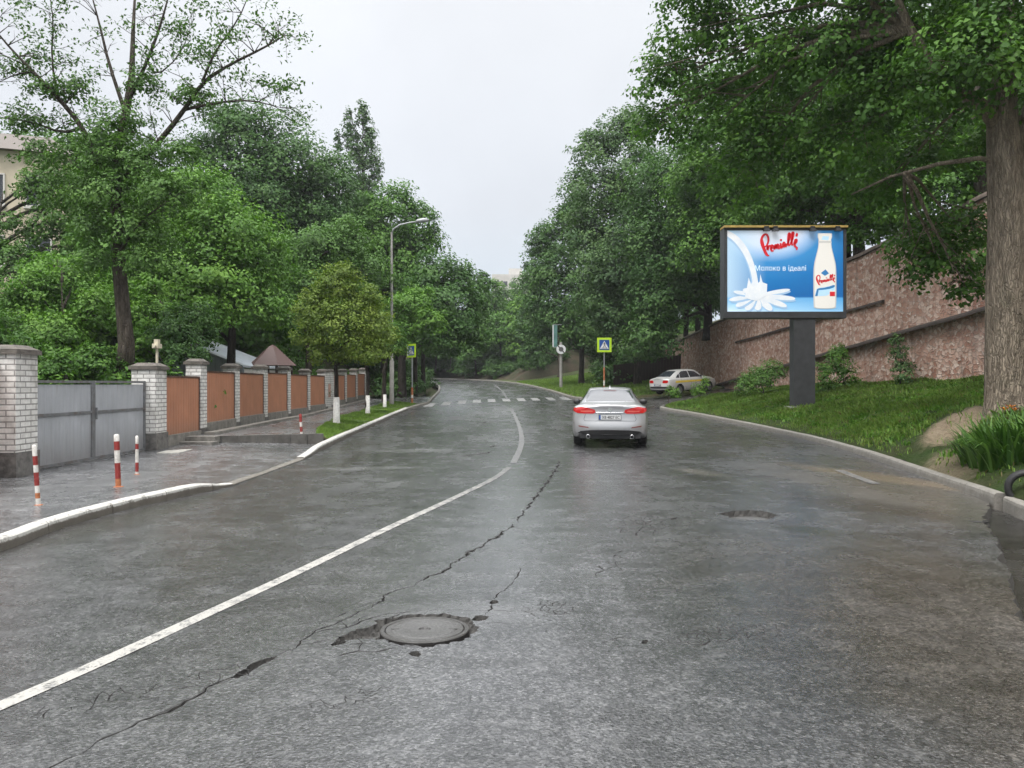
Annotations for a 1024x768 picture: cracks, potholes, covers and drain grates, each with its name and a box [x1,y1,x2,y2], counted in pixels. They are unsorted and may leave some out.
pothole [720,510,778,519]
crack [595,514,678,577]
manhole cover [380,617,469,648]
crack [26,461,573,768]
